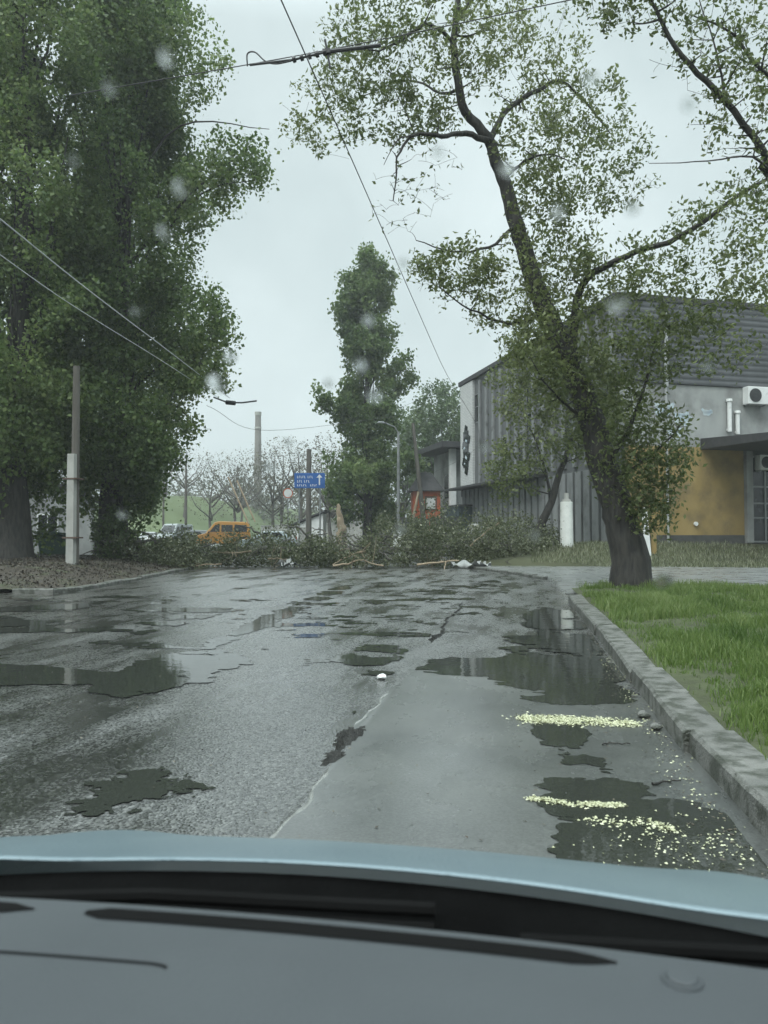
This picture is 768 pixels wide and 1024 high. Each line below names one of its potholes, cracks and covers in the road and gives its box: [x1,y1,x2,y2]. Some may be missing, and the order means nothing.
crack [428,602,463,644]
pothole [333,726,366,751]
pothole [320,750,347,766]
